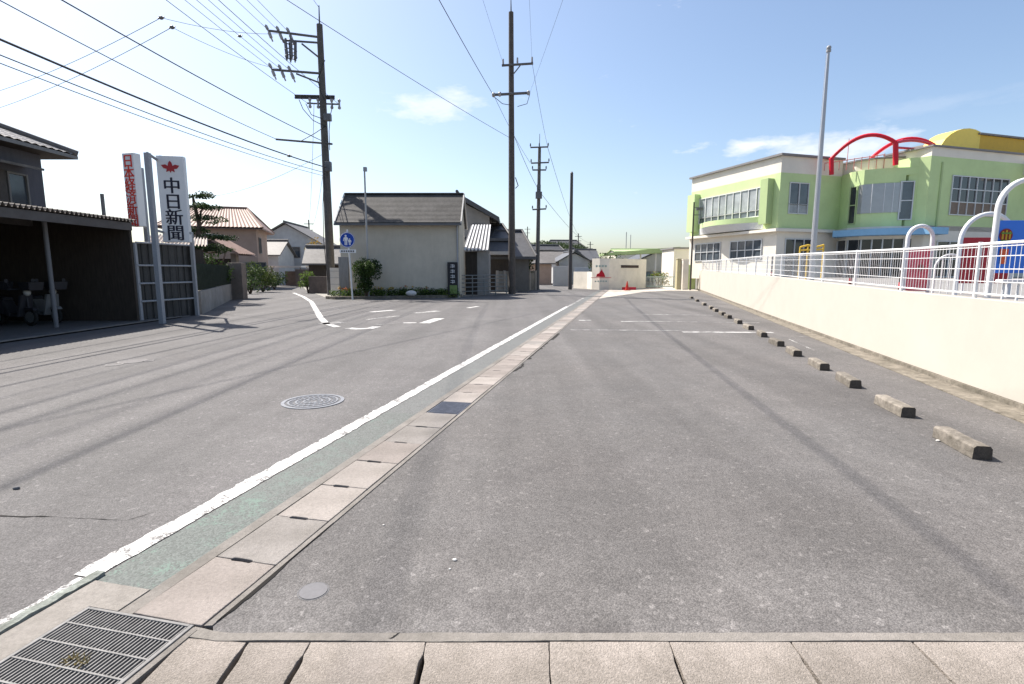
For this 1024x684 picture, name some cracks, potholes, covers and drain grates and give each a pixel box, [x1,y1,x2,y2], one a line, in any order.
drain grate [124,627,197,684]
utility cover [297,582,329,601]
crack [0,512,152,520]
manhole cover [281,394,344,409]
